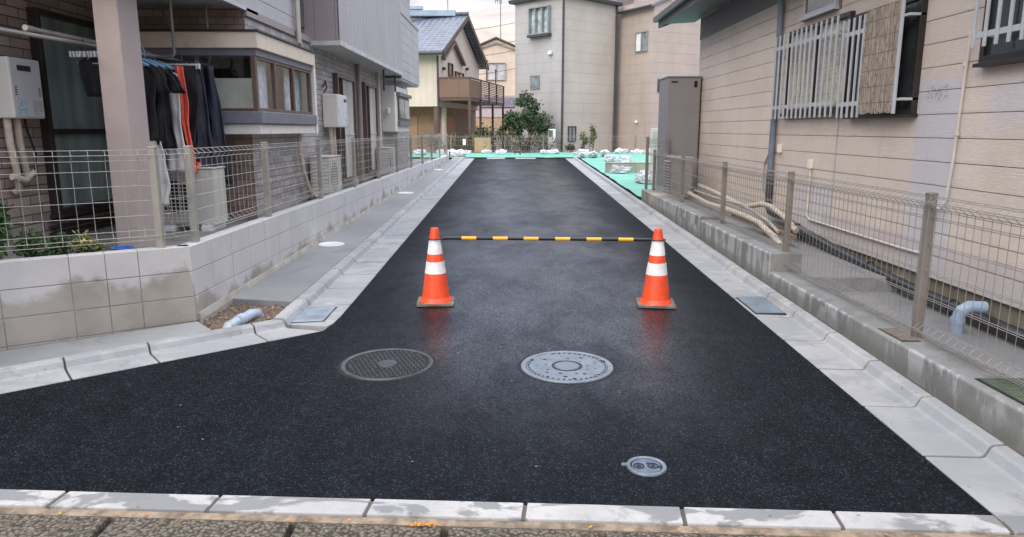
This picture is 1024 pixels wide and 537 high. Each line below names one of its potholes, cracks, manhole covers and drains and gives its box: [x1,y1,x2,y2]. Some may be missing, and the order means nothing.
manhole cover [518,351,617,385]
utility cover [621,456,667,477]
drain grate [974,378,1024,405]
manhole cover [337,348,436,382]
